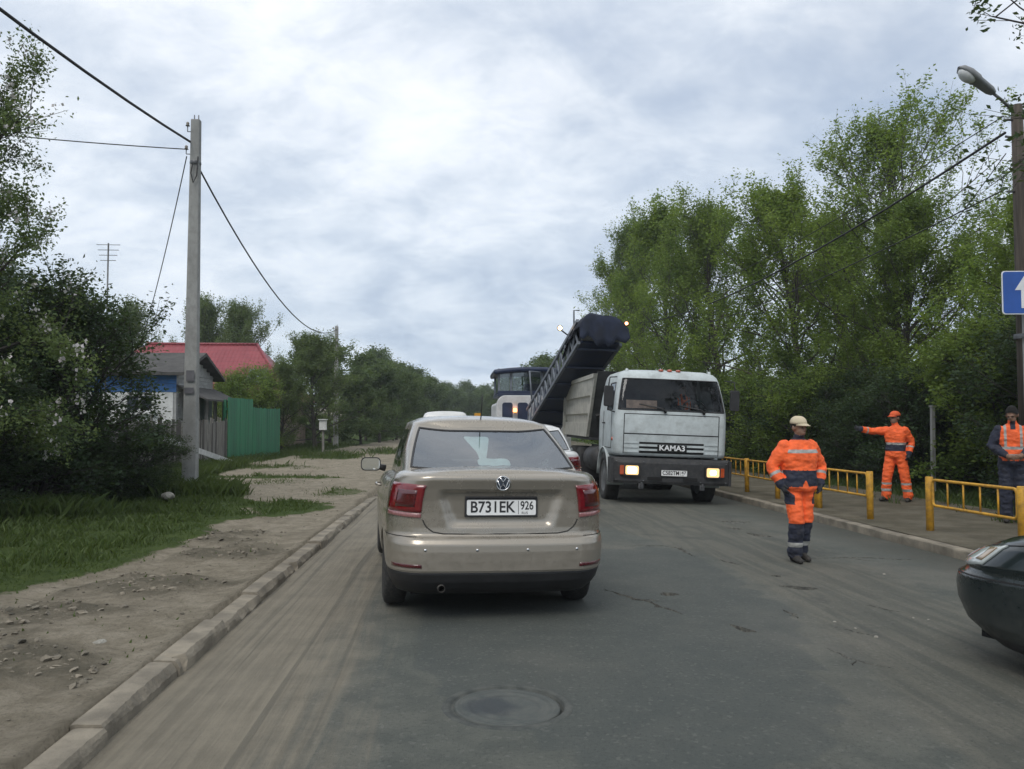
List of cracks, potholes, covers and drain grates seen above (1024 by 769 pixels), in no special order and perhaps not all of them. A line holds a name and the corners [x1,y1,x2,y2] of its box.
crack [827,627,894,669]
manhole cover [442,684,573,730]
crack [606,590,682,614]
